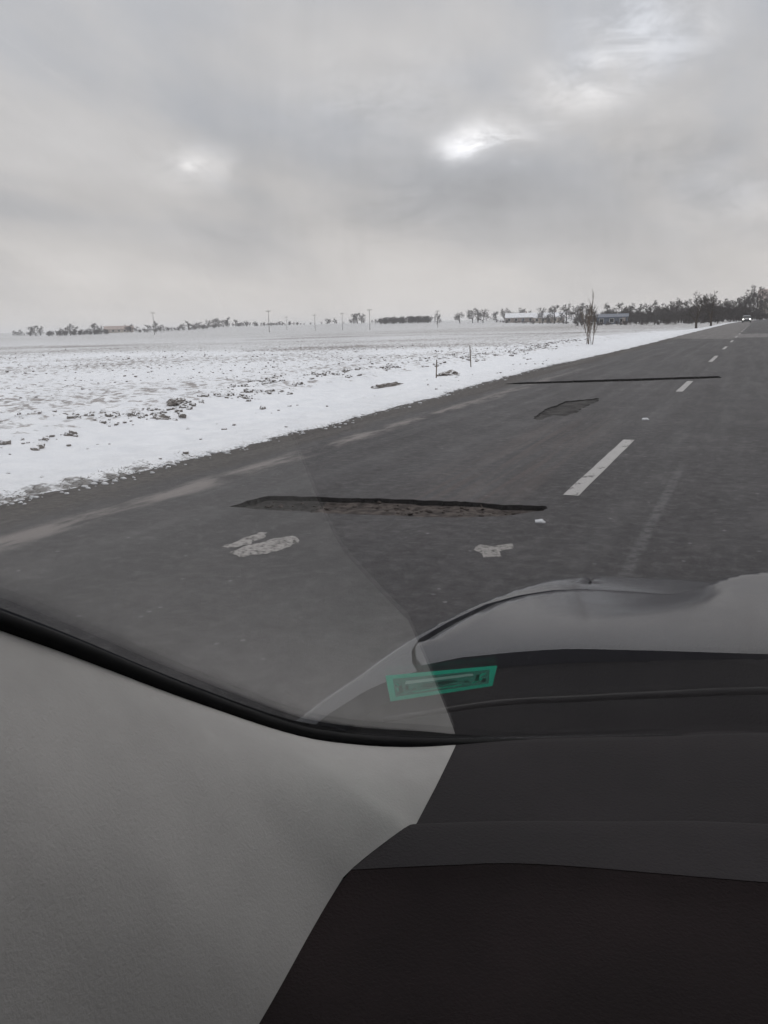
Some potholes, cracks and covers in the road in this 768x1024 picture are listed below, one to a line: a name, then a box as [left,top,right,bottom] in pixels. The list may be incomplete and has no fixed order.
pothole [533,398,599,420]
pothole [230,496,547,518]
